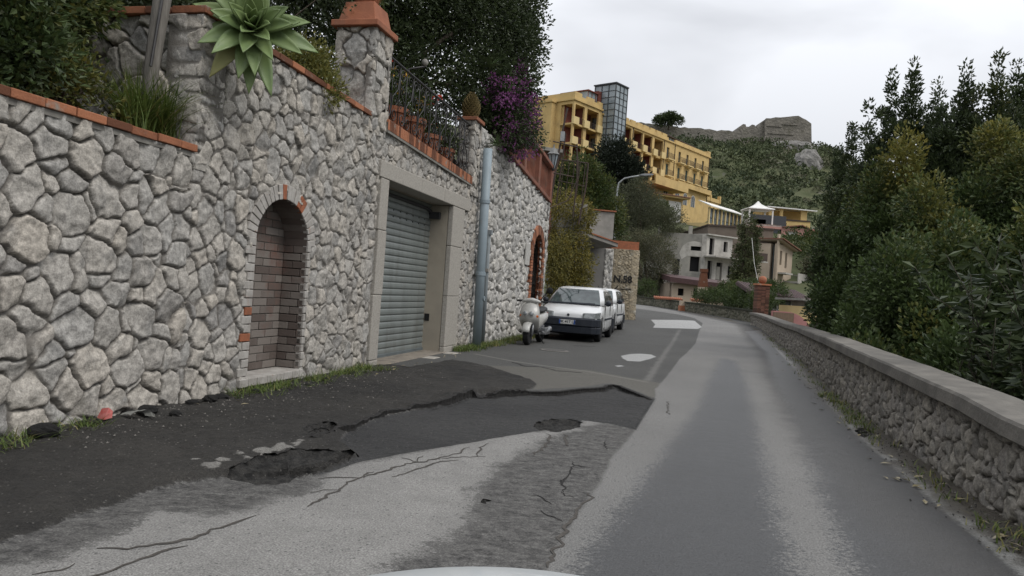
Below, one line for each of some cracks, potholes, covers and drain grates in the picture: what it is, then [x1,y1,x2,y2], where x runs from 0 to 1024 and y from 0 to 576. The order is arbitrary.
pothole [301,422,337,433]
crack [307,362,670,567]
pothole [533,419,583,432]
pothole [227,448,359,485]
crack [32,515,256,576]
